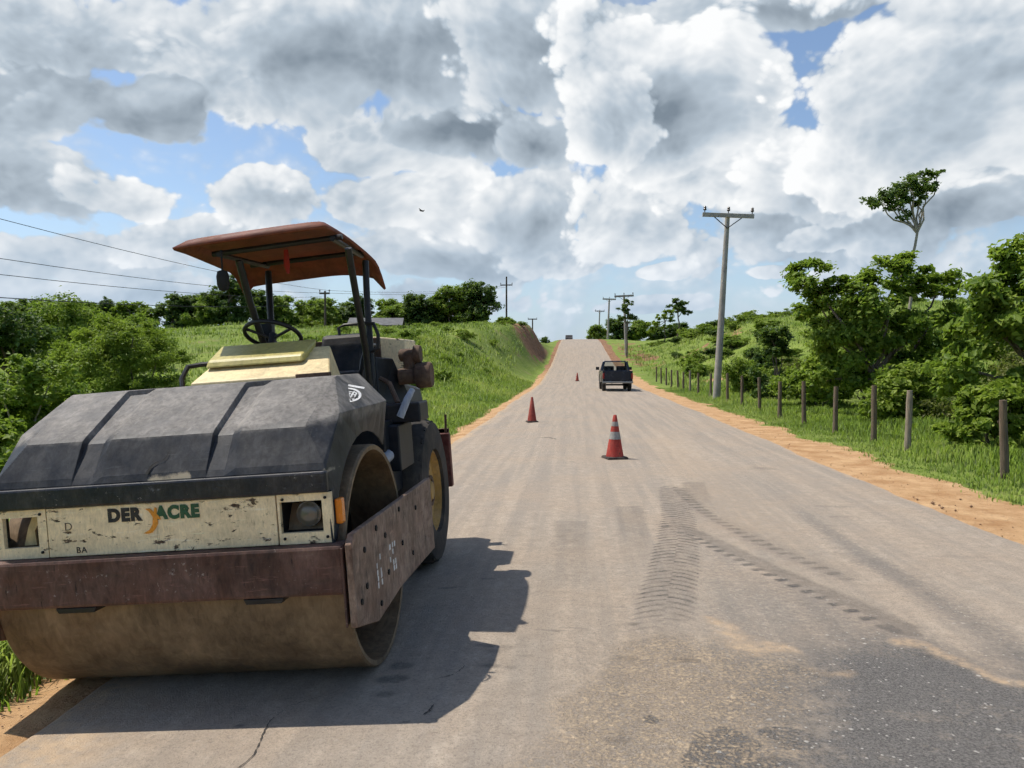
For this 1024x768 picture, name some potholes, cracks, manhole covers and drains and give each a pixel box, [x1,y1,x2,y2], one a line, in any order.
crack [238,695,327,768]
